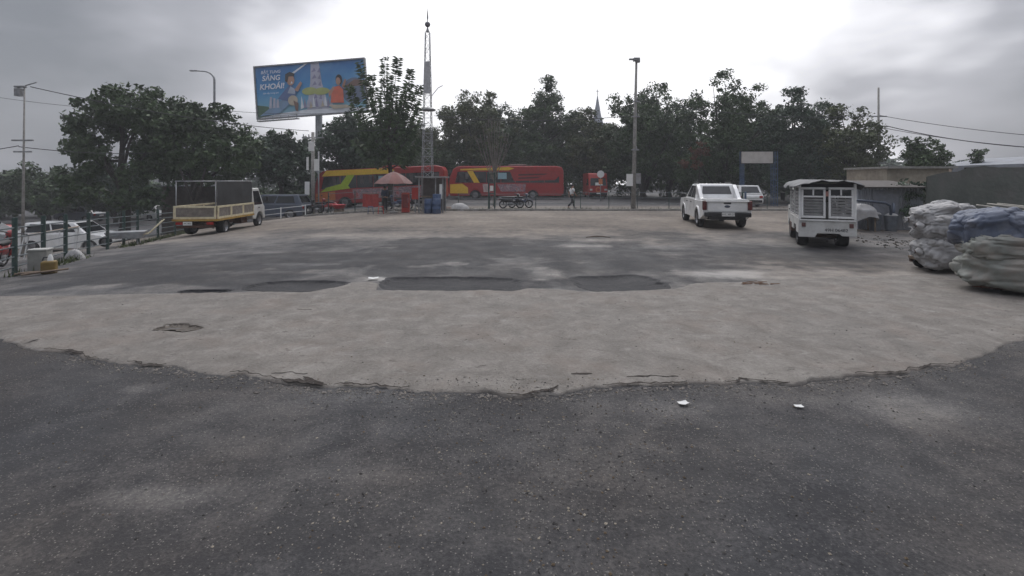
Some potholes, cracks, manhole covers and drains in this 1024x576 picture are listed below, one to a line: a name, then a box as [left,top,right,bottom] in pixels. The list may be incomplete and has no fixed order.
crack [507,373,687,395]
pothole [153,323,204,332]
